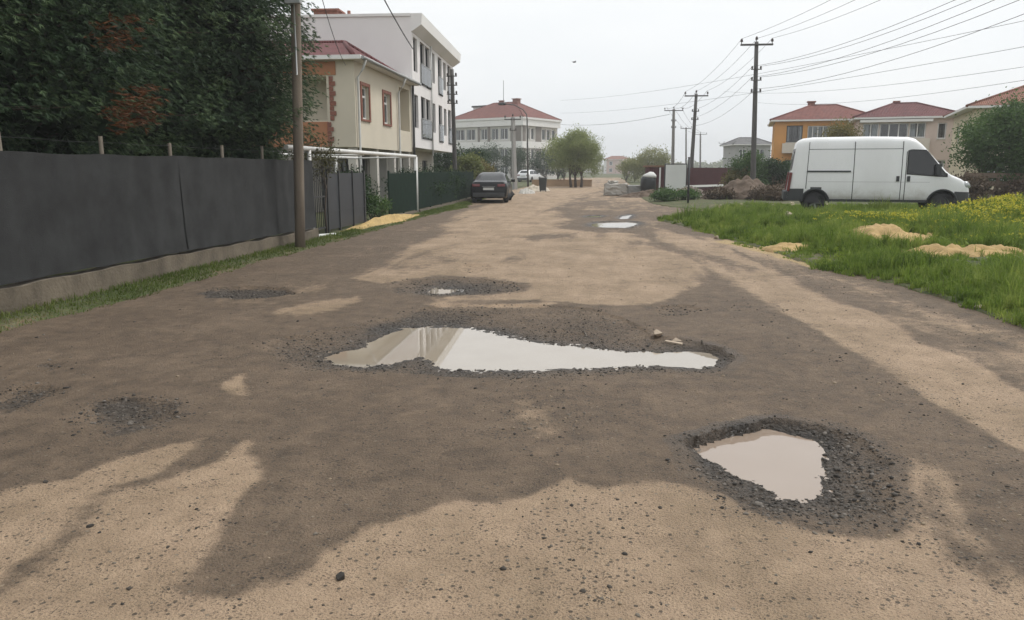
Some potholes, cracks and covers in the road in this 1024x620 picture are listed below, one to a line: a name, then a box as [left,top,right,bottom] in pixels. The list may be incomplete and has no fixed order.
pothole [201,285,303,300]
pothole [0,381,71,415]
pothole [663,413,920,537]
pothole [257,302,741,382]
pothole [582,220,649,230]
pothole [386,277,526,297]
pothole [60,393,200,435]
